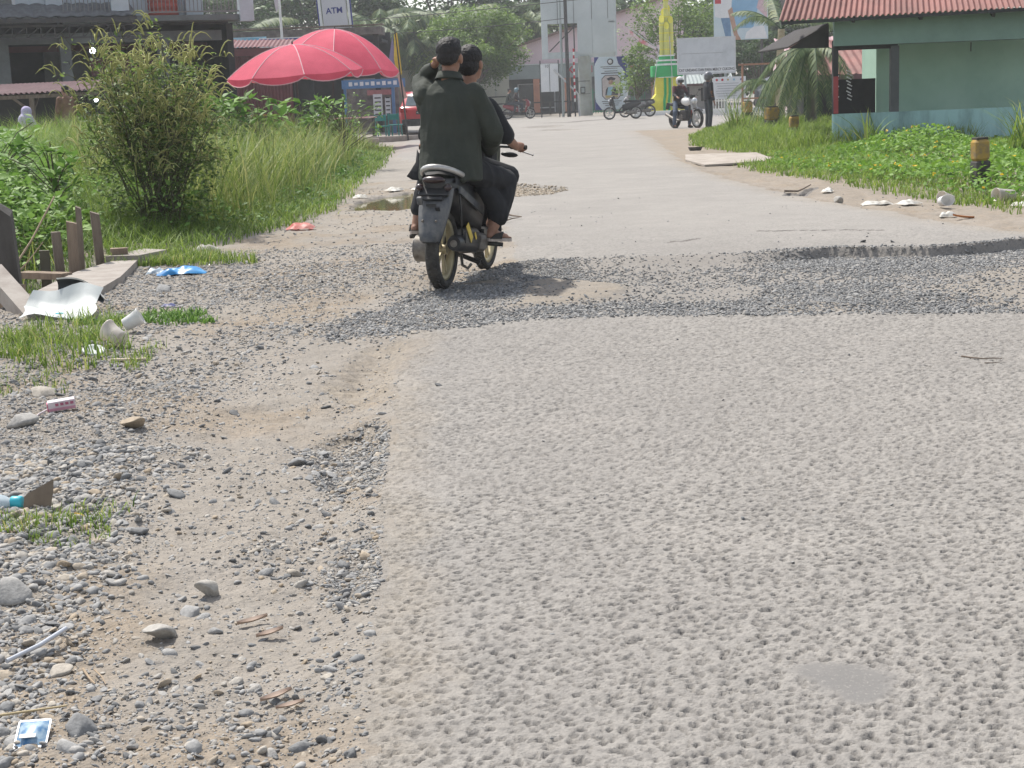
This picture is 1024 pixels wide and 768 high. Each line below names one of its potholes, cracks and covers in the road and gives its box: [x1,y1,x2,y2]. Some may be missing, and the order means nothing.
pothole [345,191,414,211]
pothole [515,183,570,197]
pothole [311,236,1024,342]
